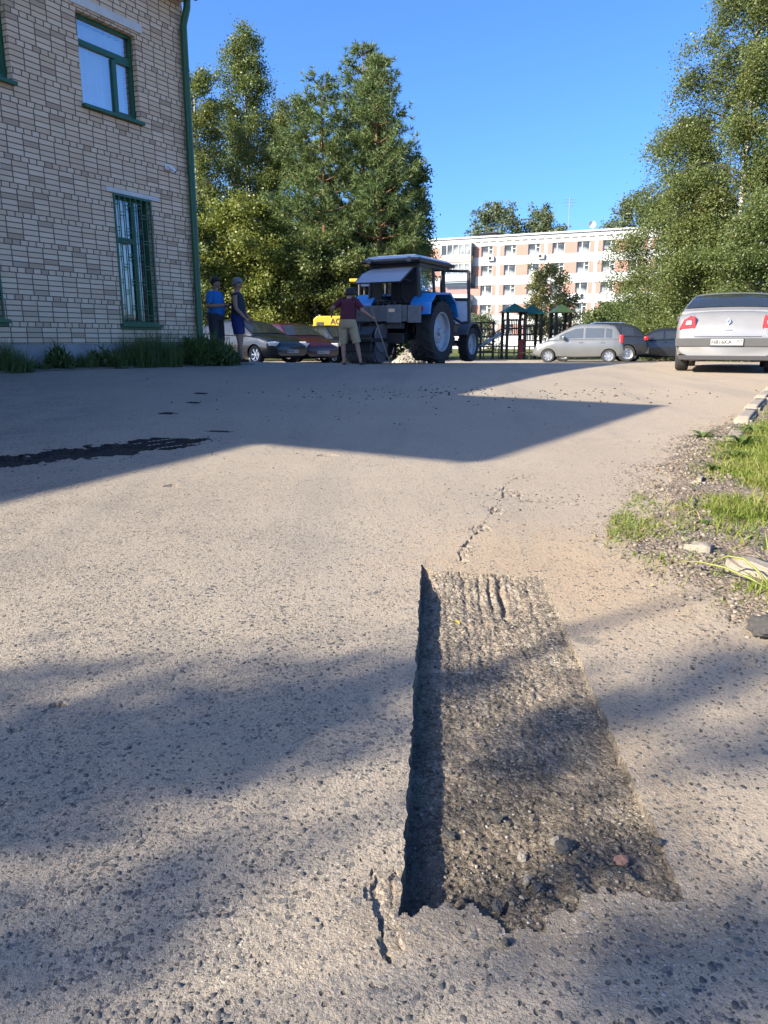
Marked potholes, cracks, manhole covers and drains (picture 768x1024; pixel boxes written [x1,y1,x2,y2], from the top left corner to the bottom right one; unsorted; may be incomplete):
crack [362,848,407,964]
crack [455,472,603,564]
pothole [398,565,684,933]
